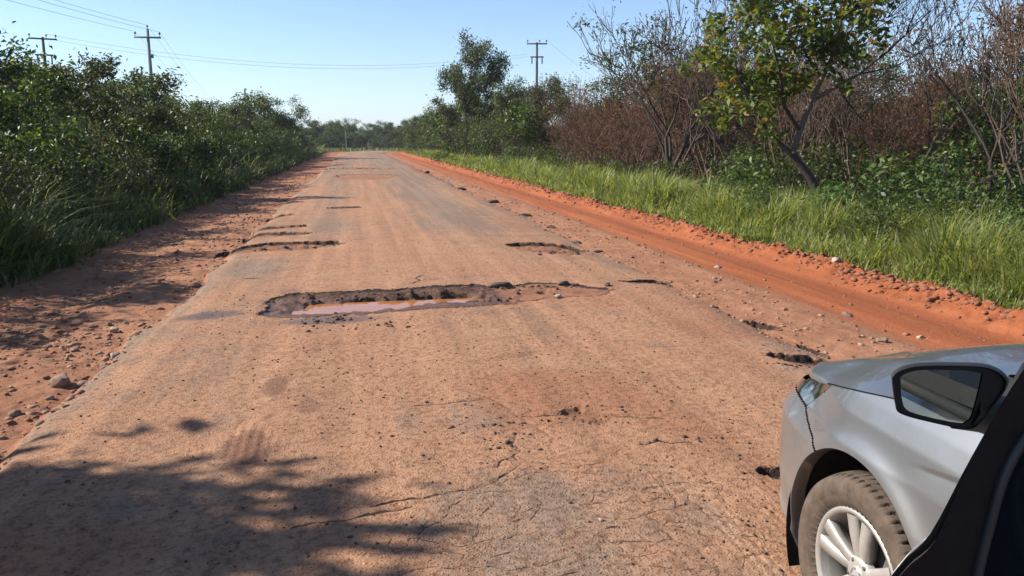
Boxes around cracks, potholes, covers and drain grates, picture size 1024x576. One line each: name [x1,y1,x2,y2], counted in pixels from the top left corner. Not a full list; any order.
pothole [212,240,347,260]
pothole [505,242,588,255]
pothole [251,224,309,236]
pothole [745,320,782,331]
pothole [257,282,615,319]
pothole [754,466,780,482]
pothole [762,352,826,367]
crack [290,389,783,576]
pothole [618,279,675,288]
